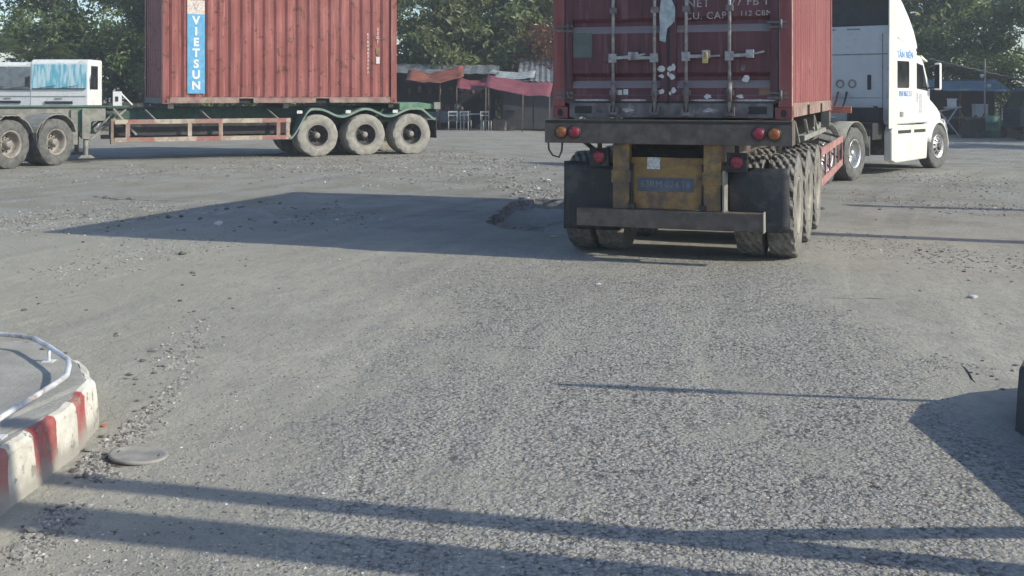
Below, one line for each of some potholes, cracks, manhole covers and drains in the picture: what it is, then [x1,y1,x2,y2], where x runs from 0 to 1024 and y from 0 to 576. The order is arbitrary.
manhole cover [103,445,168,468]
pothole [485,199,568,234]
